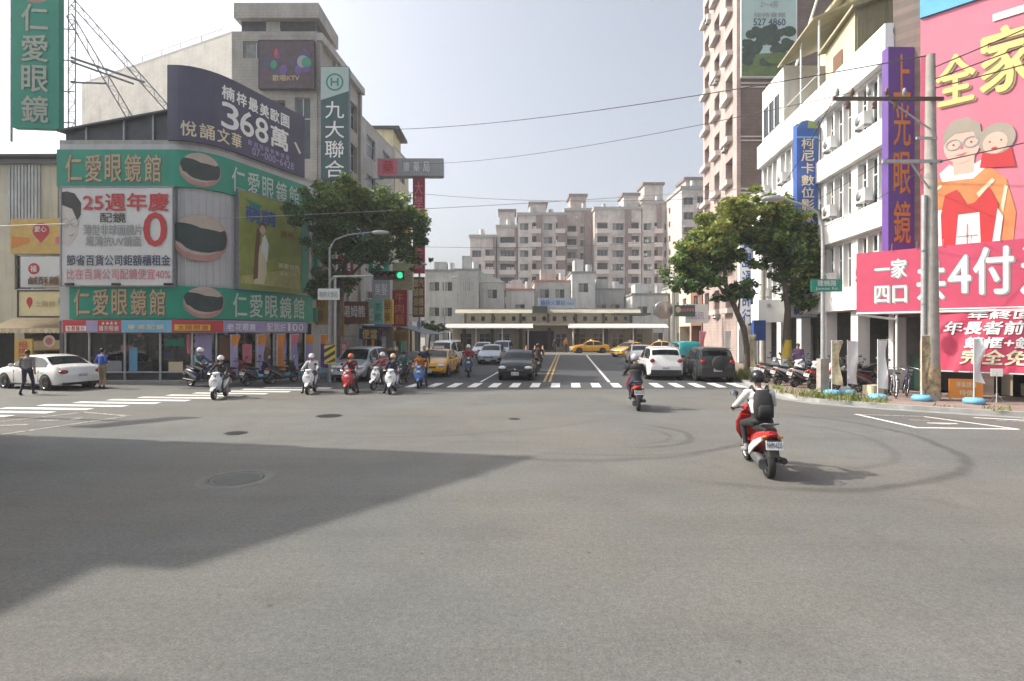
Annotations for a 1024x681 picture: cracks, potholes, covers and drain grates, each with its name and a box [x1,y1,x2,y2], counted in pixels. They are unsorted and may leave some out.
manhole cover [195,470,277,490]
